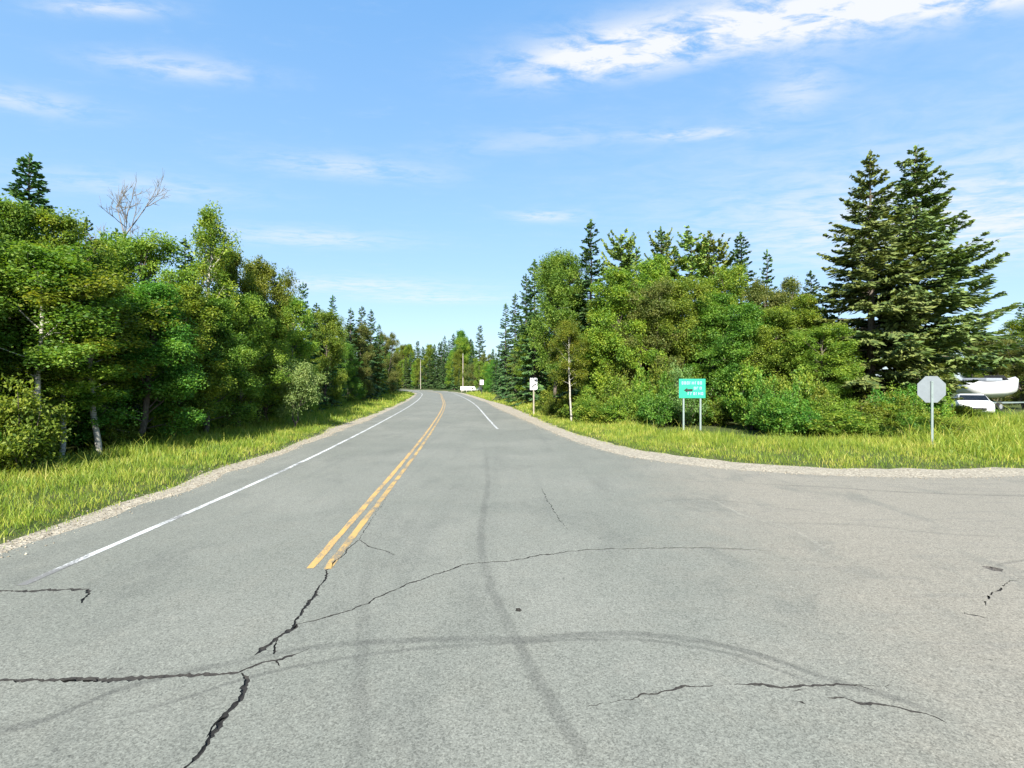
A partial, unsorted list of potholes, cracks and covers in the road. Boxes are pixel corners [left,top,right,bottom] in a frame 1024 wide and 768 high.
crack [589,683,946,723]
crack [0,504,767,768]
